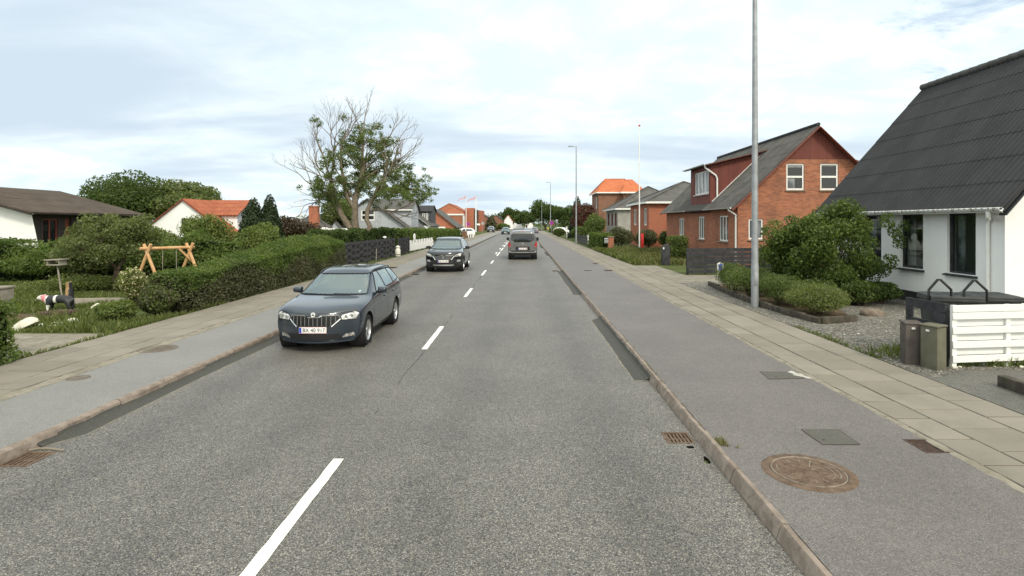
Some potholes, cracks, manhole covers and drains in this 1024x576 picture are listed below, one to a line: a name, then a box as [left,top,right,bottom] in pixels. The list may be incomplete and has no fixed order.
drain grate [0,447,65,467]
drain grate [902,439,950,453]
manhole cover [761,454,859,493]
manhole cover [136,345,179,353]
drain grate [661,432,696,444]
manhole cover [801,429,860,445]
manhole cover [761,371,812,379]
